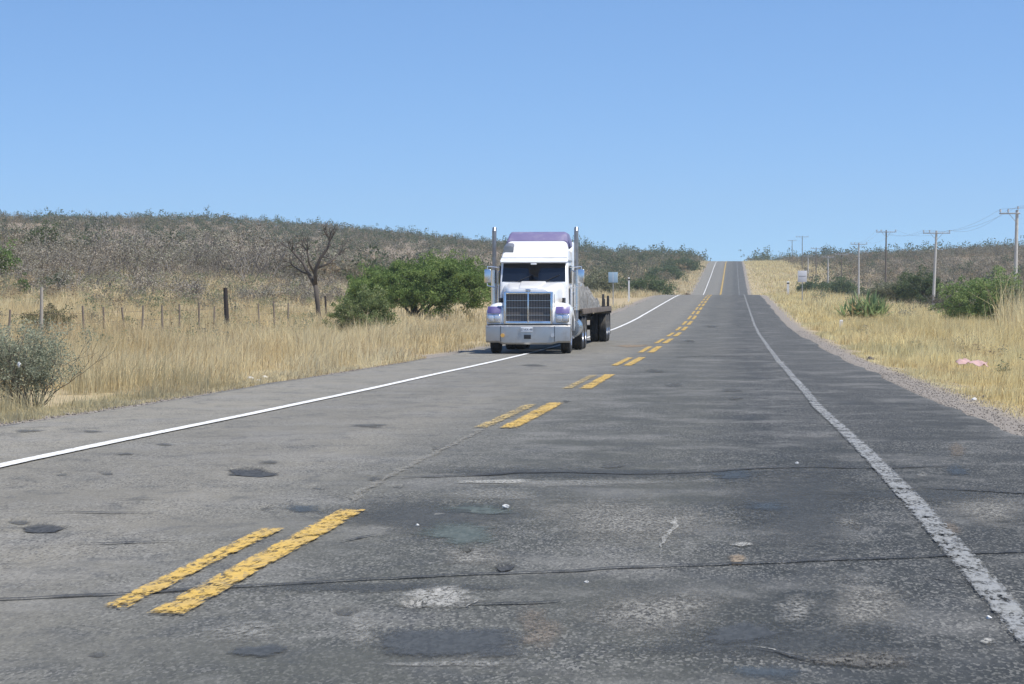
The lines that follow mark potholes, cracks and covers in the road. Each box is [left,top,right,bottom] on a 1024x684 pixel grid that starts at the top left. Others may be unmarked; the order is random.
crack [758,646,825,661]
crack [0,517,1024,607]
